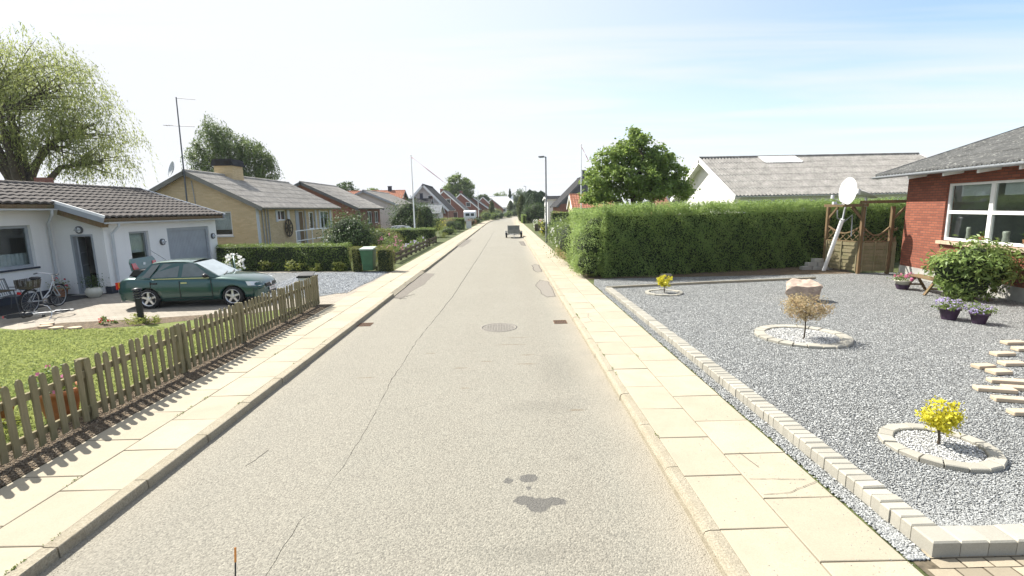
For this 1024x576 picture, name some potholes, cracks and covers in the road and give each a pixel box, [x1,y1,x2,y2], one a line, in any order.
manhole cover [480,323,517,332]
